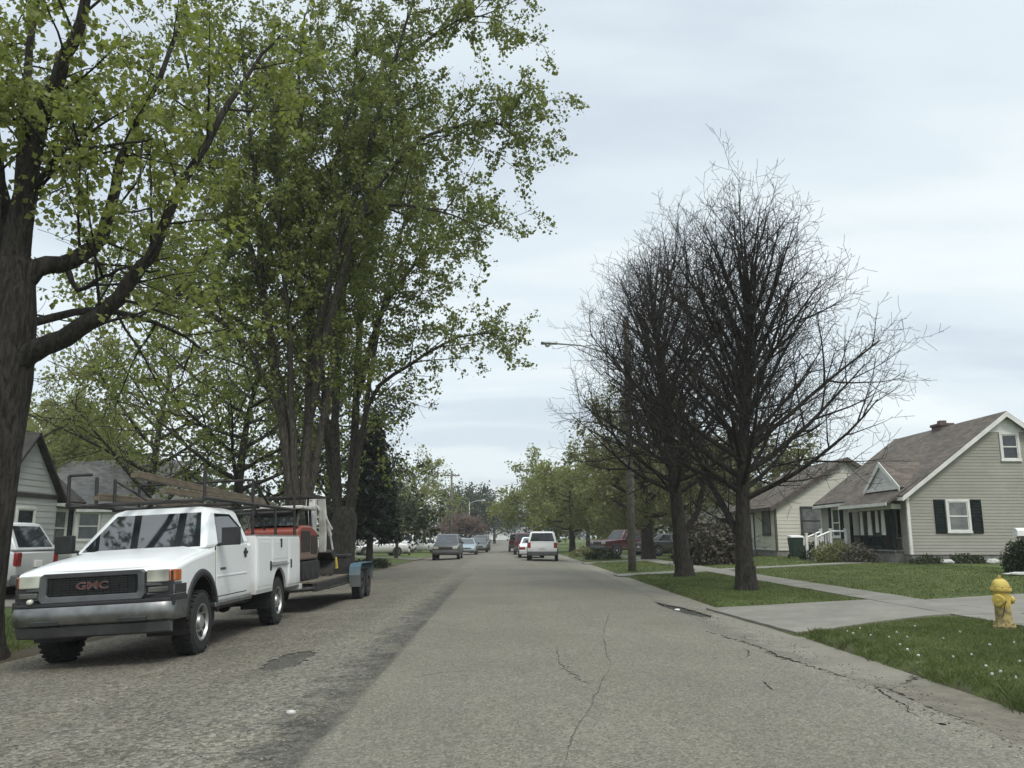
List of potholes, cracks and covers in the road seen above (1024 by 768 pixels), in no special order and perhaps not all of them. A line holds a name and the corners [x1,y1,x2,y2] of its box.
crack [707,631,1007,739]
crack [556,617,610,767]
pothole [259,650,317,671]
